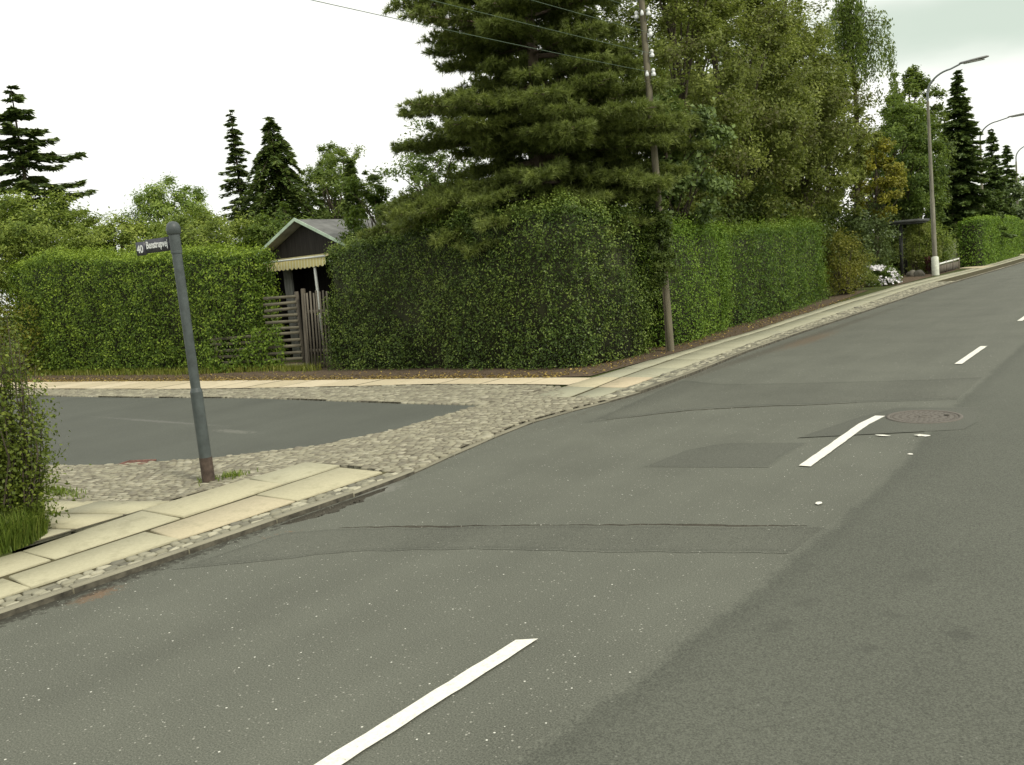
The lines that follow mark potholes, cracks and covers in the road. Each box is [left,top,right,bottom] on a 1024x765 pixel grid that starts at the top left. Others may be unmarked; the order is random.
manhole cover [886,410,963,424]
